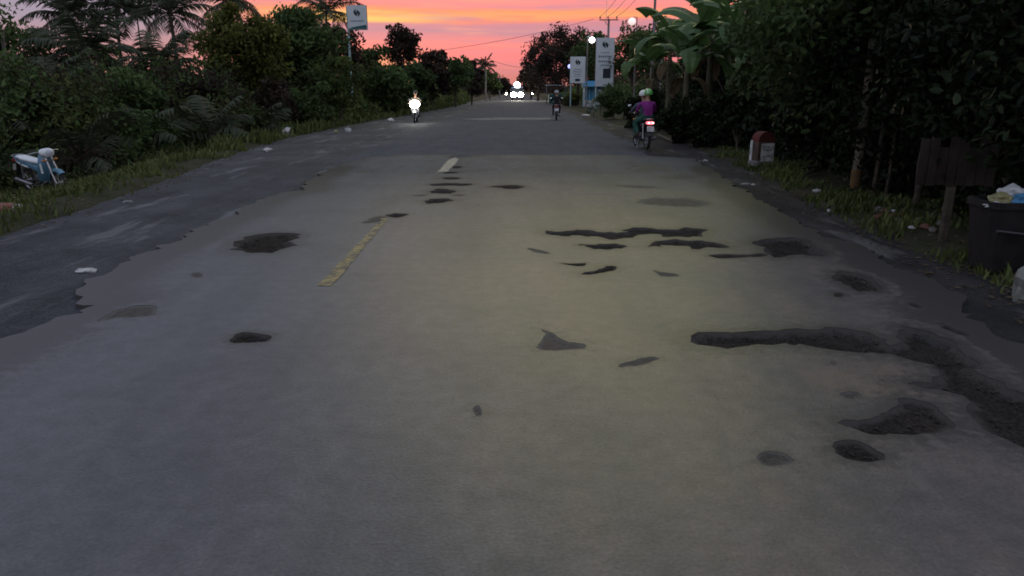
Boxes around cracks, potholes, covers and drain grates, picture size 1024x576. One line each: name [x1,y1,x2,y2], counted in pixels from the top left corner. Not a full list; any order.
pothole [583,266,617,275]
pothole [545,227,707,240]
pothole [752,237,828,257]
pothole [757,451,794,467]
pothole [691,326,1024,448]
pothole [648,239,729,249]
pothole [536,329,586,351]
pothole [832,440,885,462]
pothole [230,332,272,343]
pothole [832,271,882,292]
pothole [230,233,301,253]
